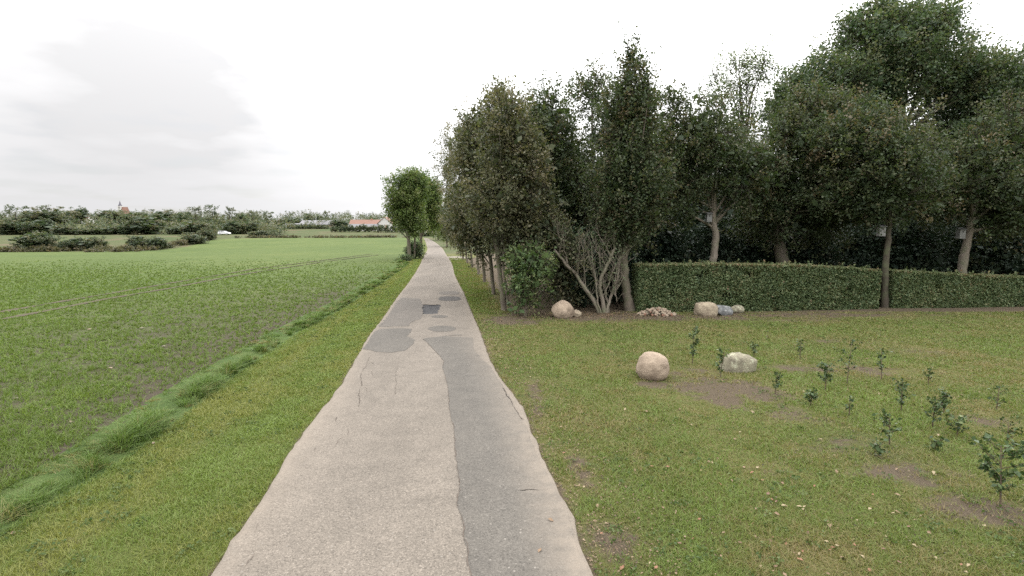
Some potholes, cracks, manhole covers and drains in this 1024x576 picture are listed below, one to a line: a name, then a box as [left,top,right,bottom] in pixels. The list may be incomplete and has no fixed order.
pothole [422,305,440,314]
